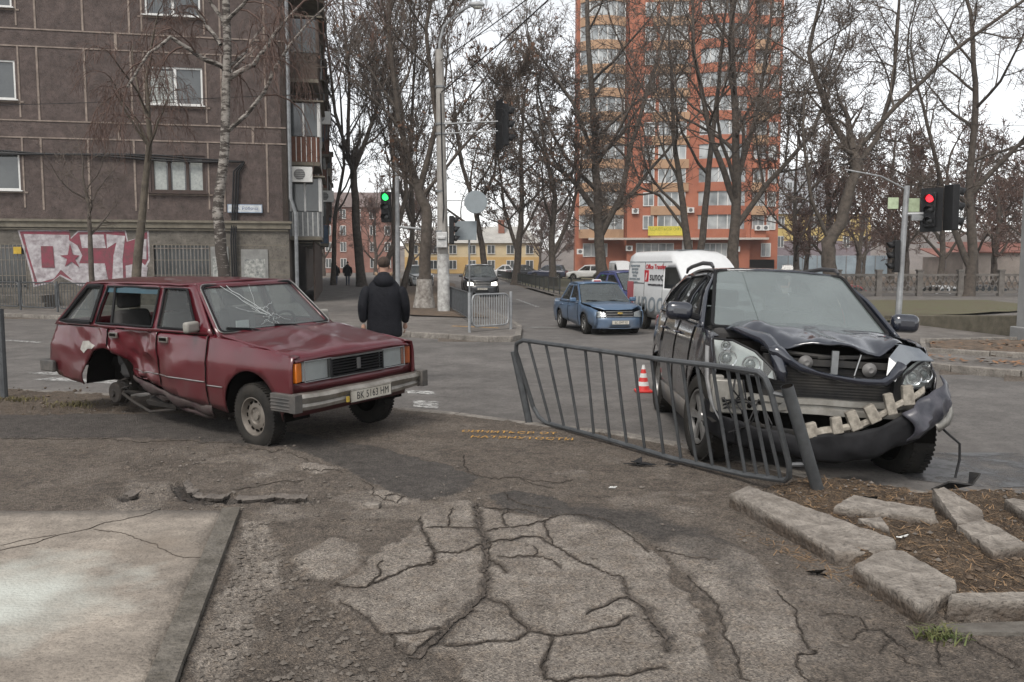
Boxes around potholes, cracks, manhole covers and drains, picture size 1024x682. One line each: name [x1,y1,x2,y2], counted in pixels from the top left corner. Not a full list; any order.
pothole [234,493,308,505]
crack [330,455,750,682]
crack [971,636,1020,666]
crack [0,509,200,558]
pothole [121,490,142,502]
pothole [179,479,231,506]
crack [777,590,942,682]
